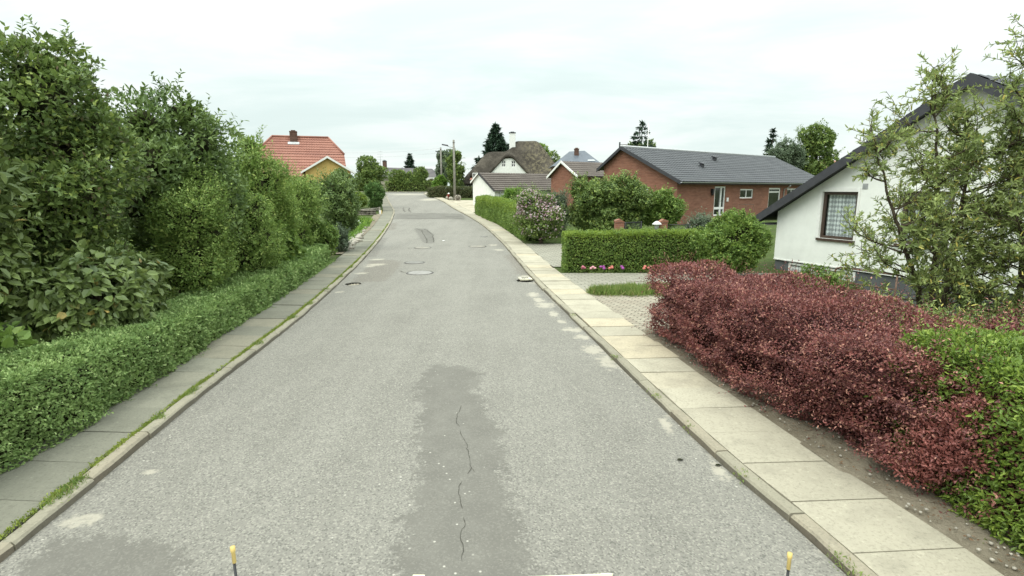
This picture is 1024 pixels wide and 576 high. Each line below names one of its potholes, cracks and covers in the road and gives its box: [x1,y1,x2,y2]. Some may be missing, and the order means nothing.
crack [456,407,475,562]
